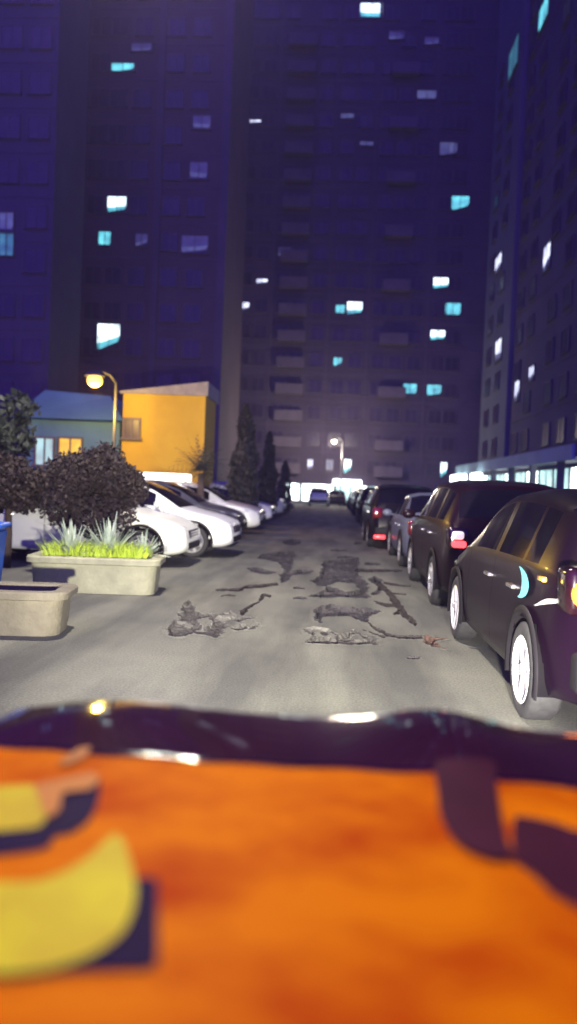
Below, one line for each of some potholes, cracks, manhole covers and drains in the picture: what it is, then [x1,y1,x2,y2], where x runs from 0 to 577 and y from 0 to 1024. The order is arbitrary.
pothole [297,625,384,647]
pothole [255,550,317,583]
crack [356,568,424,641]
pothole [160,600,268,640]
crack [212,583,282,617]
pothole [242,567,279,575]
pothole [305,558,375,600]
